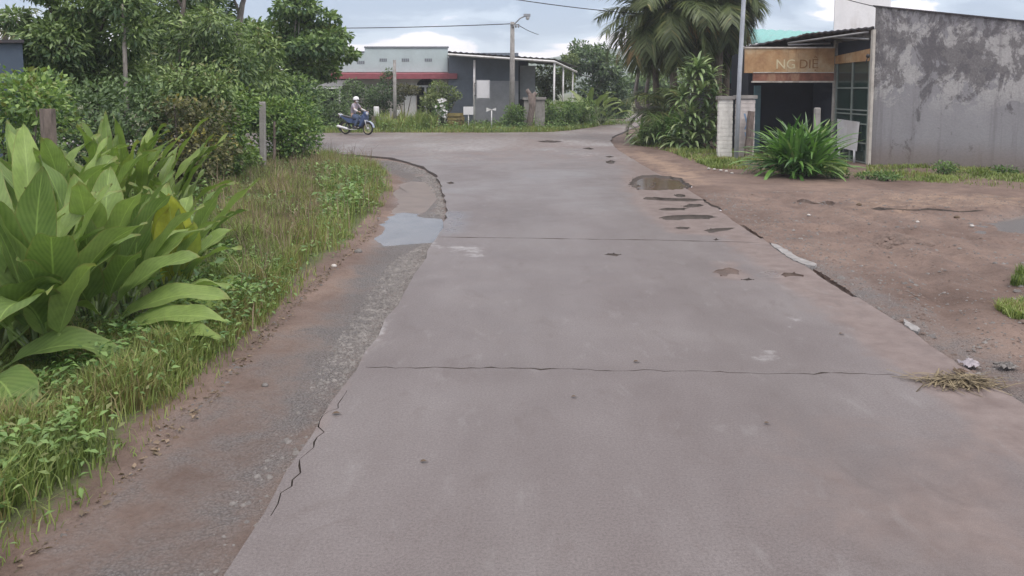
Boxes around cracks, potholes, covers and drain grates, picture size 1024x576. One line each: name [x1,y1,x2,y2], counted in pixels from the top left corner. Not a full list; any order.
pothole [714,268,741,276]
pothole [628,175,692,190]
crack [271,391,347,515]
